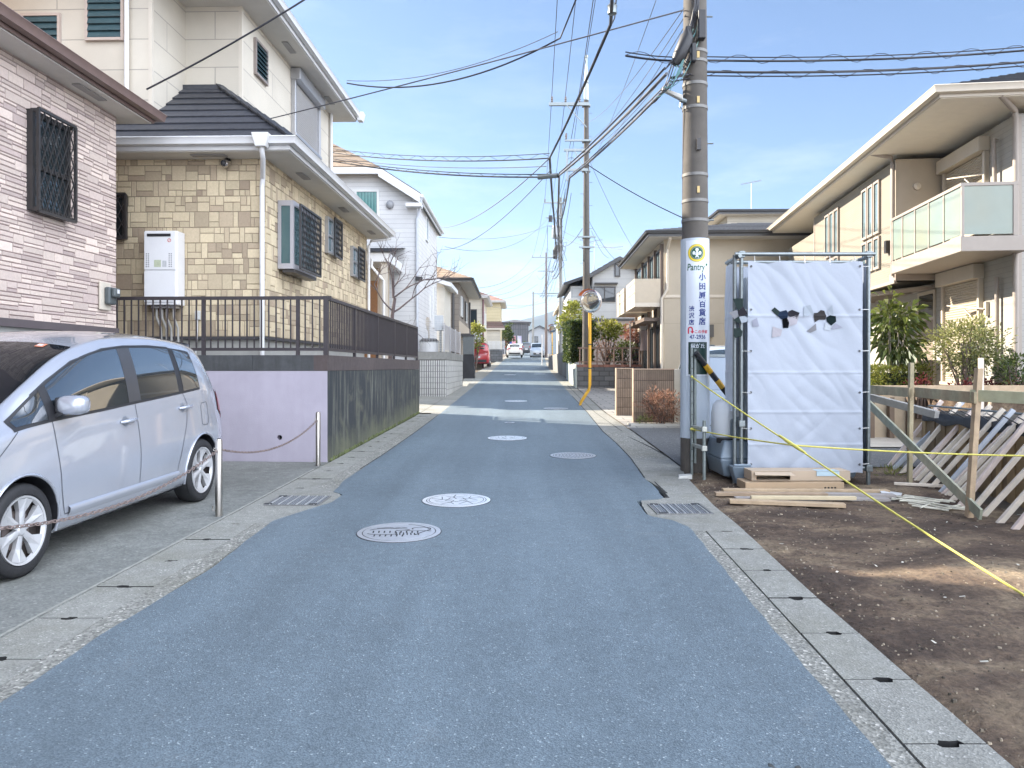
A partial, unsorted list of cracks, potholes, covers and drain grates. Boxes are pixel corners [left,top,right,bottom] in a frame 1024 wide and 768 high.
drain grate [647,503,714,515]
manhole cover [422,493,491,507]
manhole cover [356,522,442,543]
drain grate [264,495,331,506]
